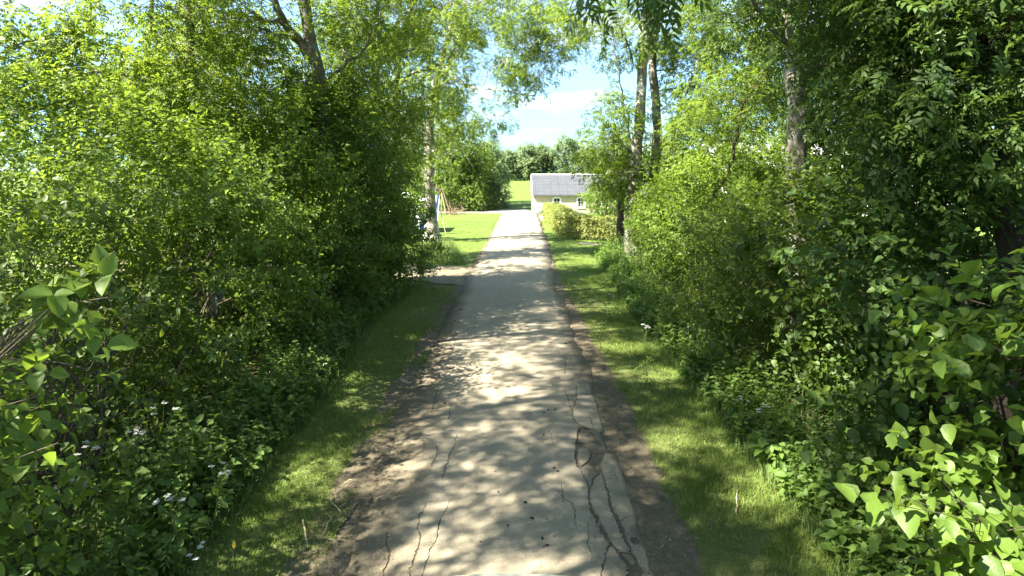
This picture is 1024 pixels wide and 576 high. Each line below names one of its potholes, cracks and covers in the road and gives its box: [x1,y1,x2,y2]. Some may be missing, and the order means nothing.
crack [565,388,594,430]
crack [561,469,643,576]
crack [409,499,450,576]
pothole [574,427,605,474]
crack [383,532,392,576]
